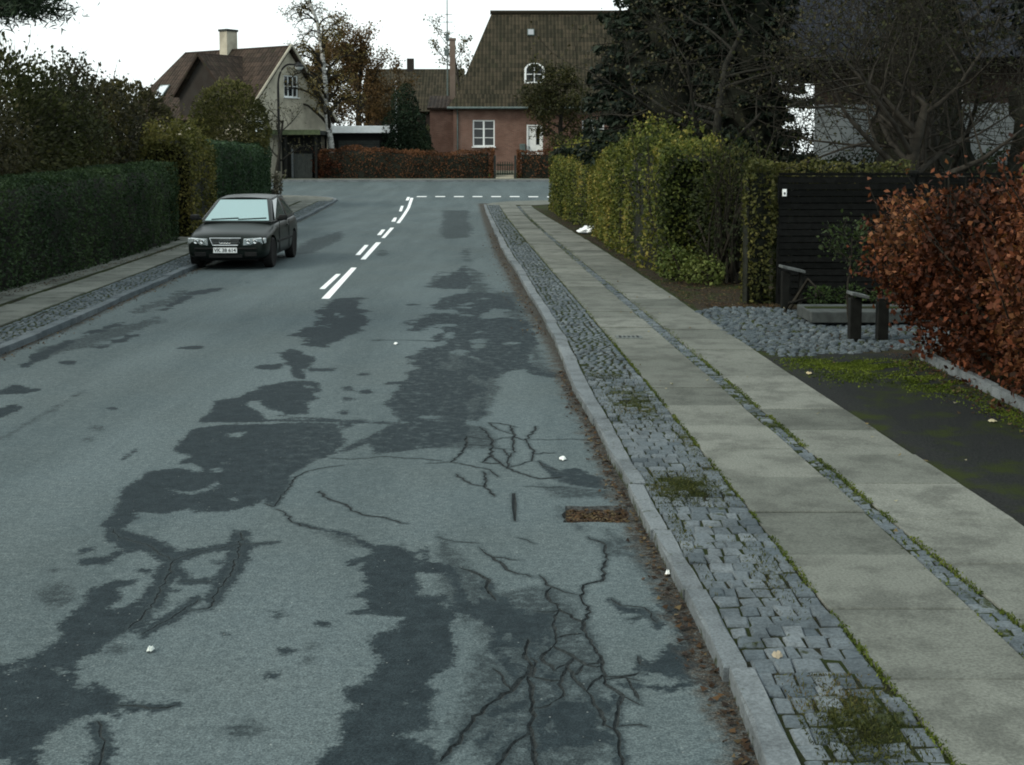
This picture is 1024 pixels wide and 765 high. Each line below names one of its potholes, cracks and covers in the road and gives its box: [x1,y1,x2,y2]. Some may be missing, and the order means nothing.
crack [97,705,176,765]
crack [113,528,272,634]
crack [264,423,657,765]
